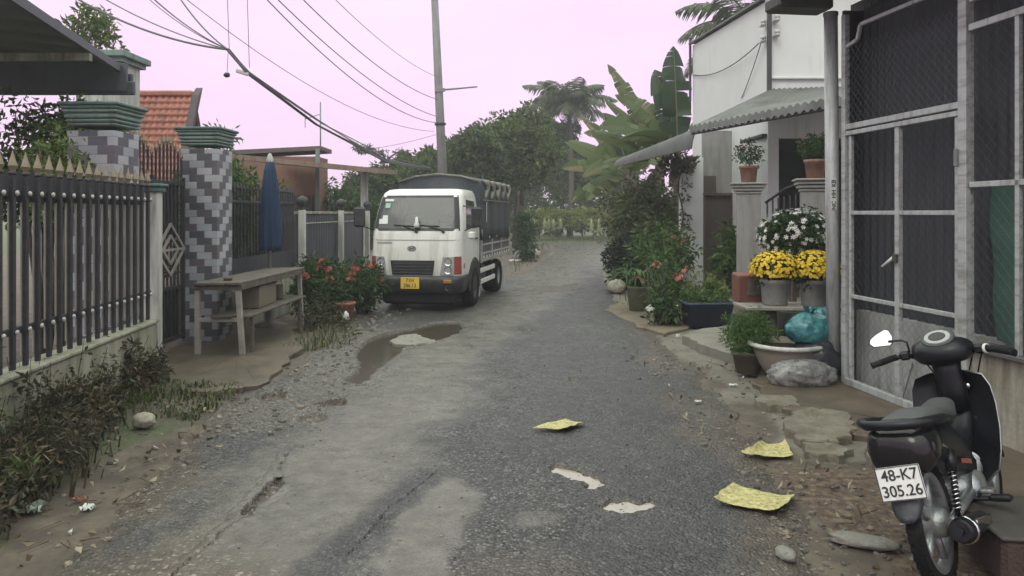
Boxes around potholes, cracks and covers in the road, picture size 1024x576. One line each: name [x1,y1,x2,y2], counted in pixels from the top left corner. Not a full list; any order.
pothole [334,321,471,385]
pothole [304,394,355,411]
crack [328,469,446,567]
pothole [227,470,296,522]
